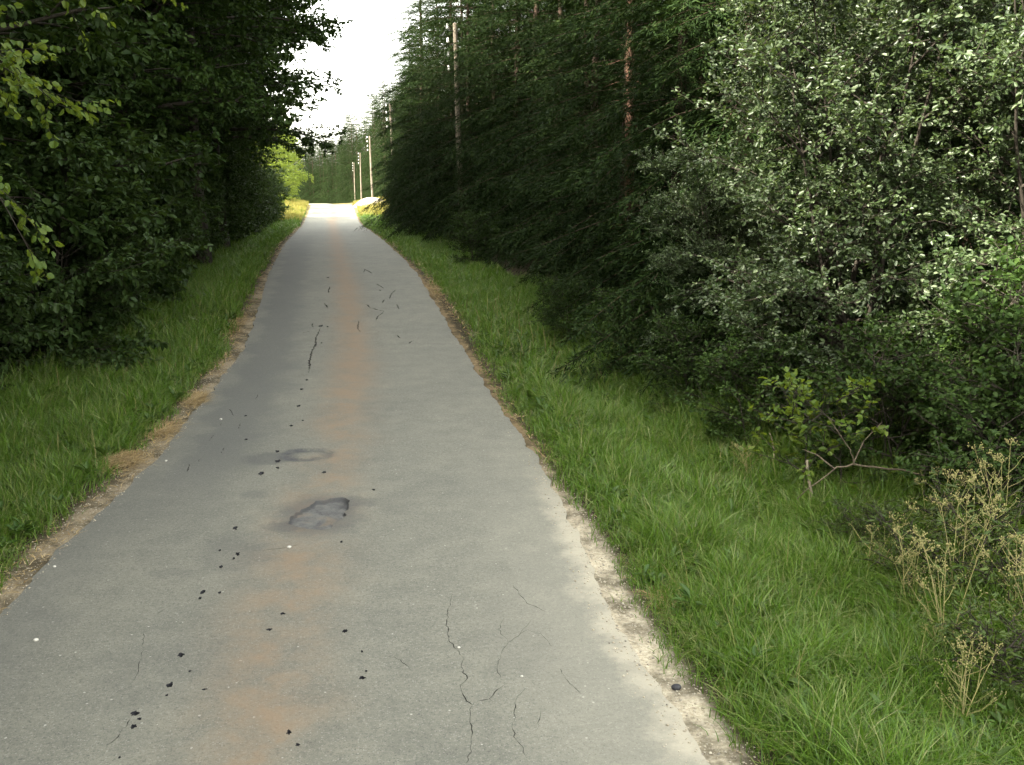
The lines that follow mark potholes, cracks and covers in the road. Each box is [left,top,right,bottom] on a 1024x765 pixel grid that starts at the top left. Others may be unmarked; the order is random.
crack [303,324,320,373]
crack [446,588,550,763]
pothole [288,497,350,530]
